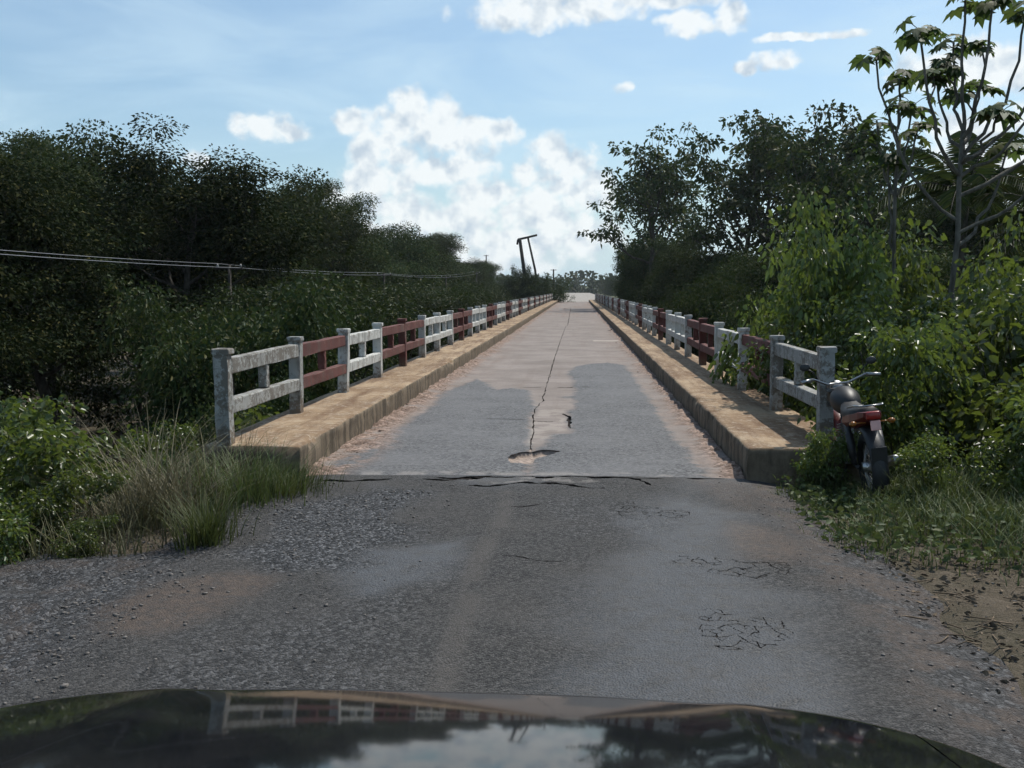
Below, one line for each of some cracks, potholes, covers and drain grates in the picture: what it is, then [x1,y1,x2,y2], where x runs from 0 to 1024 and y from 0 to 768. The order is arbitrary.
crack [522,314,573,453]
pothole [508,450,560,464]
crack [698,608,793,650]
crack [422,476,664,488]
crack [614,502,690,520]
crack [673,556,792,579]
